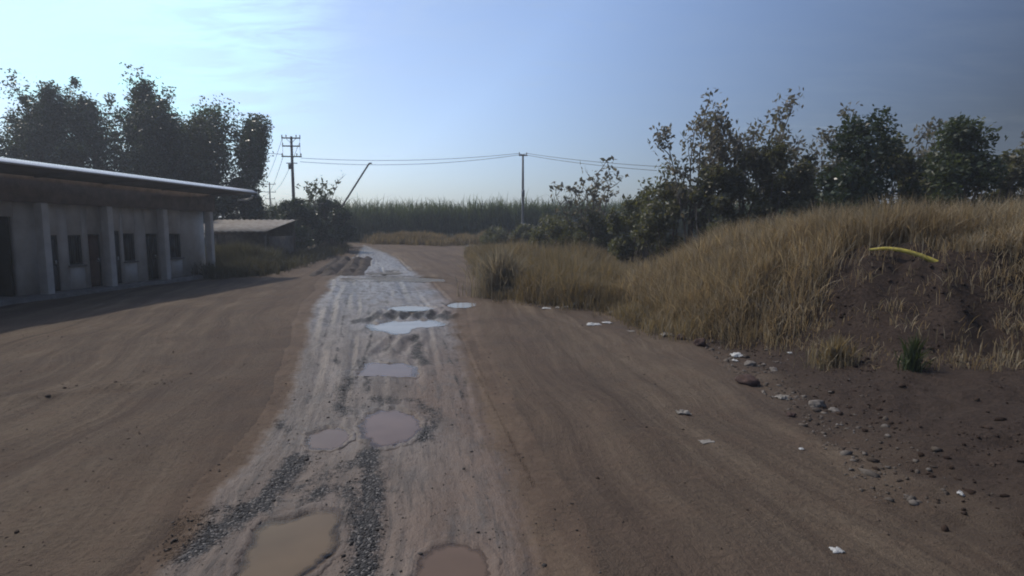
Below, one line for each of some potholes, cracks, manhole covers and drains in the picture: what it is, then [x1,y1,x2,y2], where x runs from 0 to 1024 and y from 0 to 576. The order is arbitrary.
pothole [352,404,431,452]
pothole [349,361,423,379]
pothole [381,305,440,315]
pothole [442,301,482,309]
pothole [402,535,503,576]
pothole [225,500,350,576]
pothole [300,424,356,453]
pothole [361,317,451,336]
